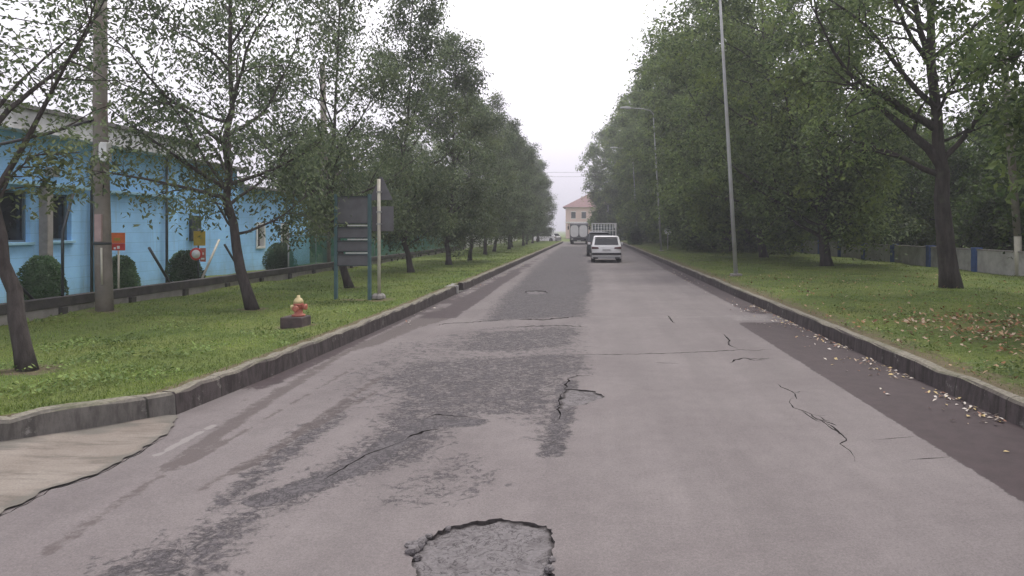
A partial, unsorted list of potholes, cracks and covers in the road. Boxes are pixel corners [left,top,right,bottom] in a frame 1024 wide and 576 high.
crack [580,336,781,362]
crack [319,414,473,482]
pothole [404,518,556,576]
crack [556,375,588,420]
crack [778,384,855,458]
